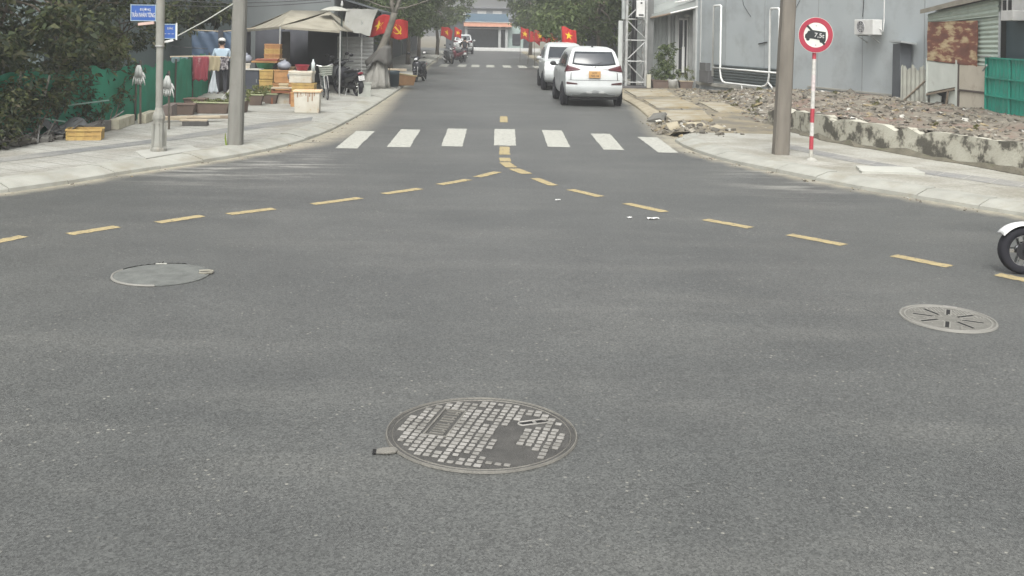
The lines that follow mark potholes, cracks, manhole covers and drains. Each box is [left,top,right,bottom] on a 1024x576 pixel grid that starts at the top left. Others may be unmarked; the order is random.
manhole cover [372,397,578,474]
manhole cover [899,304,999,334]
manhole cover [110,261,214,287]
